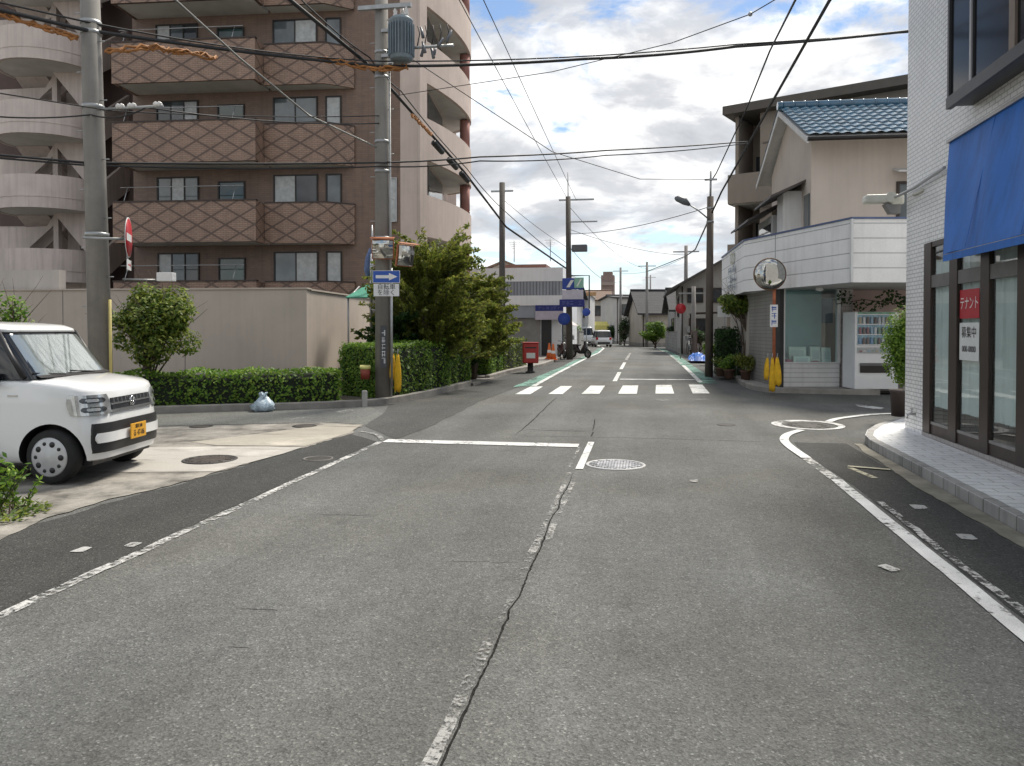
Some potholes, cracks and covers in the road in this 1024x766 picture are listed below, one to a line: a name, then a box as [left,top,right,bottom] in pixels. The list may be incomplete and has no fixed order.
manhole cover [586,459,646,471]
manhole cover [181,455,238,464]
crack [440,473,573,766]
